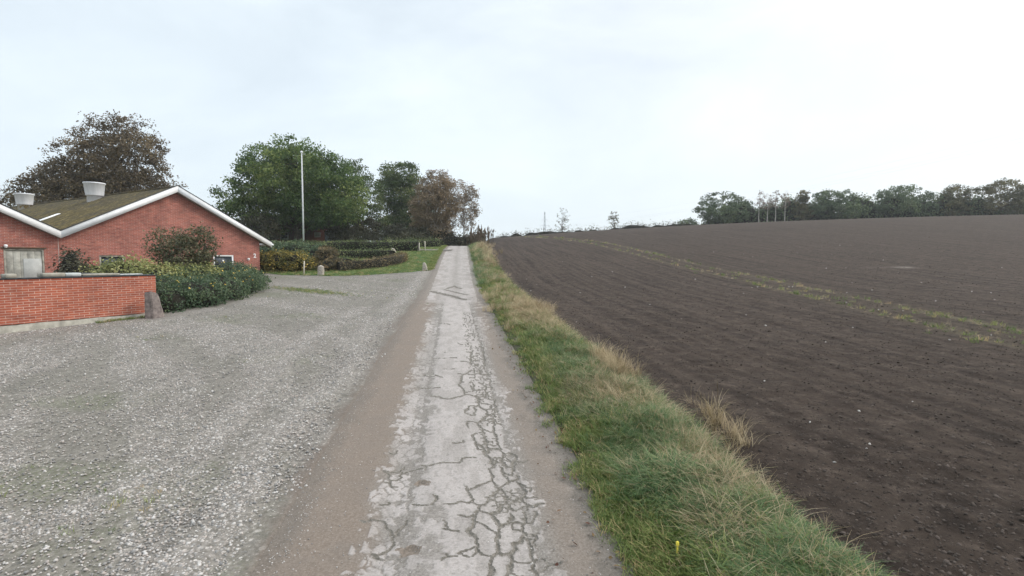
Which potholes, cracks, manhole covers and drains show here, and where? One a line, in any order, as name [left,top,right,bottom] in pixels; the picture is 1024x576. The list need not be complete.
crack [359,286,563,576]
